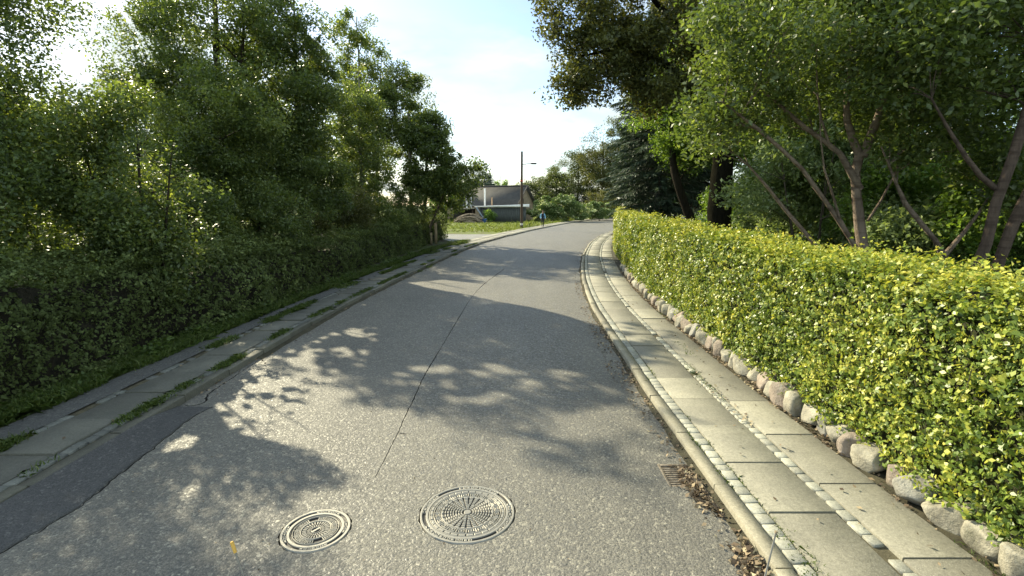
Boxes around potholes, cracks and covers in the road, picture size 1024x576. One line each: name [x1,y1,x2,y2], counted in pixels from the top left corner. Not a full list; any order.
drain grate [657,464,688,487]
manhole cover [280,509,351,554]
manhole cover [420,486,514,545]
